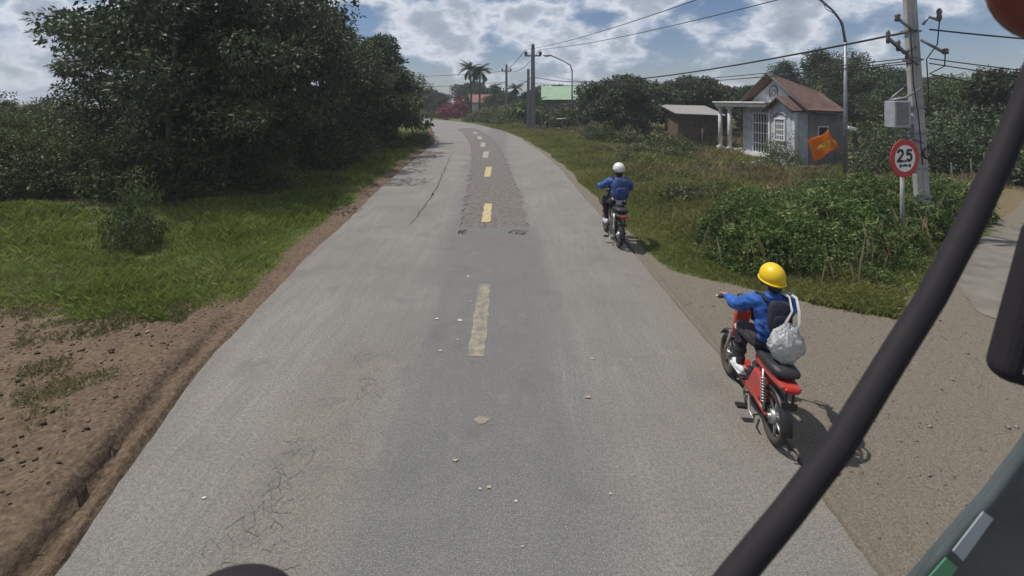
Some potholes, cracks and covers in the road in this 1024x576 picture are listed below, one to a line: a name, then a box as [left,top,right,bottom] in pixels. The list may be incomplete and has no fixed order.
crack [405,155,452,225]
crack [202,349,383,570]
